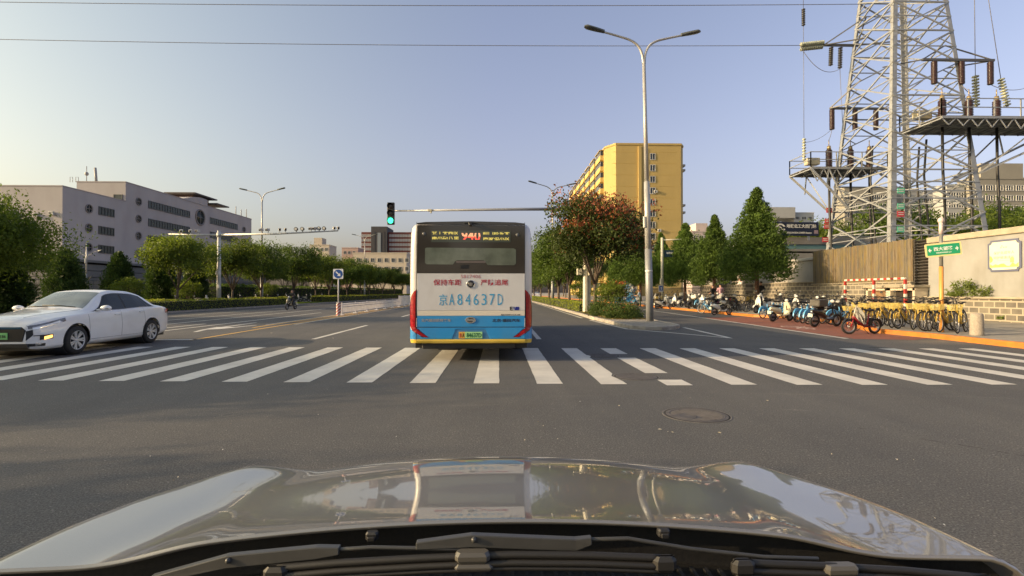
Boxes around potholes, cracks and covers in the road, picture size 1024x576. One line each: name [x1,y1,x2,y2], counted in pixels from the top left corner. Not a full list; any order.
manhole cover [662,407,733,423]
